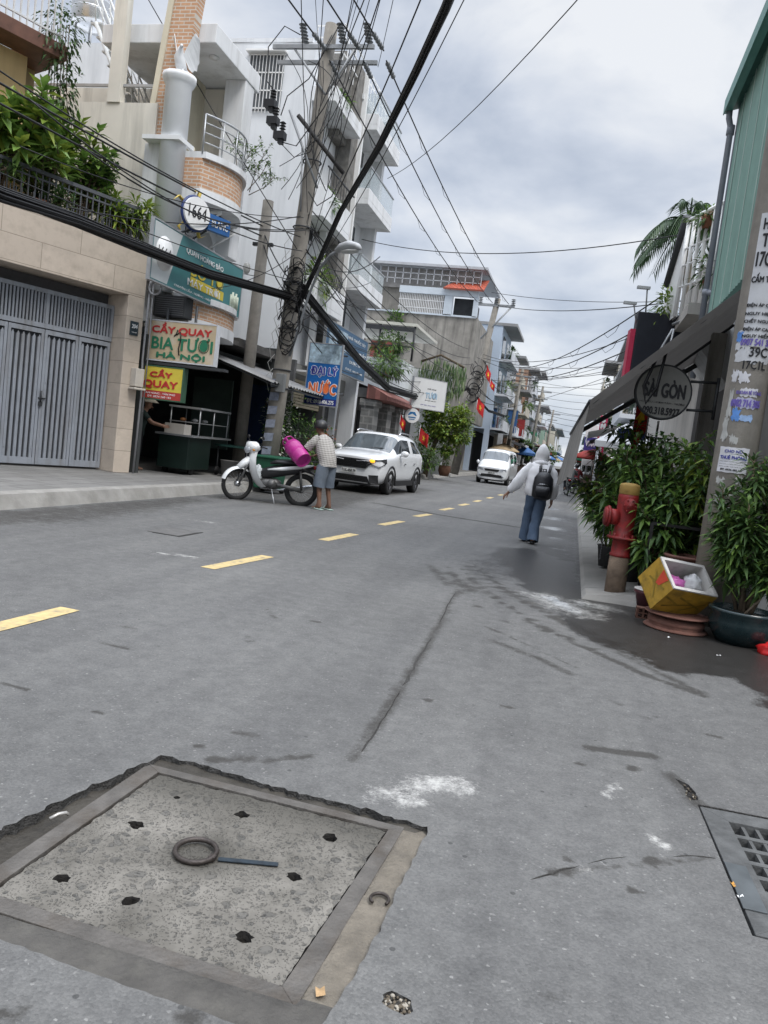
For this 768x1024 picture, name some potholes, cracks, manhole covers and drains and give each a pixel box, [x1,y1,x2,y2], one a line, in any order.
crack [361,594,455,752]
crack [531,855,712,880]
pothole [677,780,698,800]
pothole [383,992,412,1015]
manhole cover [0,760,427,1024]
drain grate [700,807,768,940]
